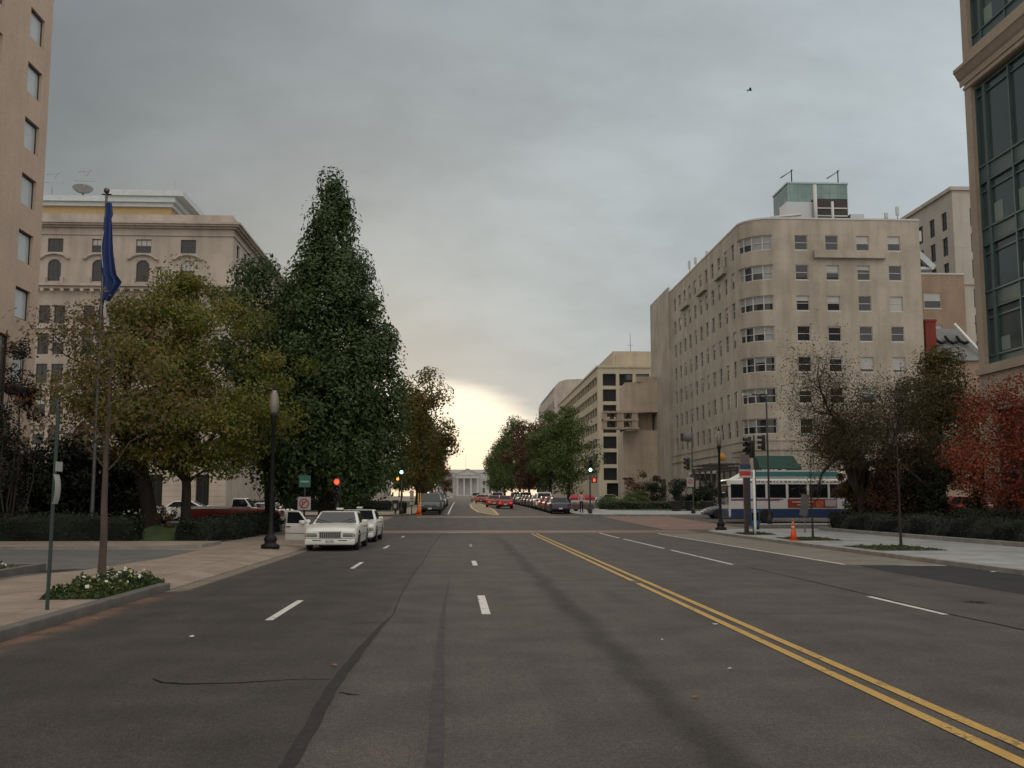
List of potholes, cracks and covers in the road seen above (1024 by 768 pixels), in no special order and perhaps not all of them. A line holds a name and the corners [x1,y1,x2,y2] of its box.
crack [152,678,359,695]
